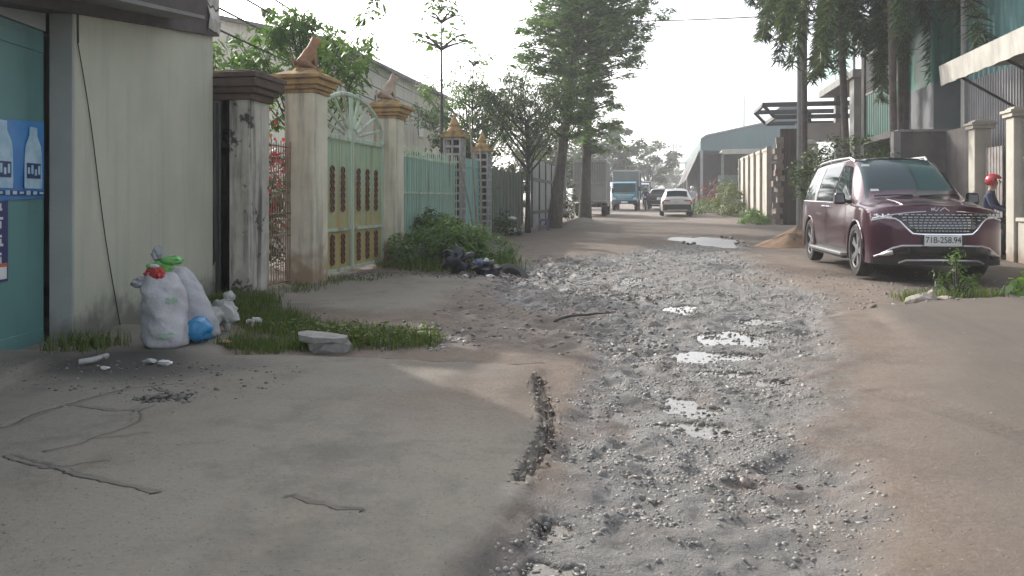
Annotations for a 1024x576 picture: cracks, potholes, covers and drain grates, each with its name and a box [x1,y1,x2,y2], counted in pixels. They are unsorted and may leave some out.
pothole [505,374,563,488]
pothole [525,513,582,549]
pothole [689,329,782,351]
pothole [656,304,703,315]
crack [286,496,361,514]
pothole [659,349,772,365]
crack [0,383,180,495]
pothole [654,395,735,423]
pothole [662,236,745,249]
pothole [647,418,747,442]
pothole [125,392,197,404]
